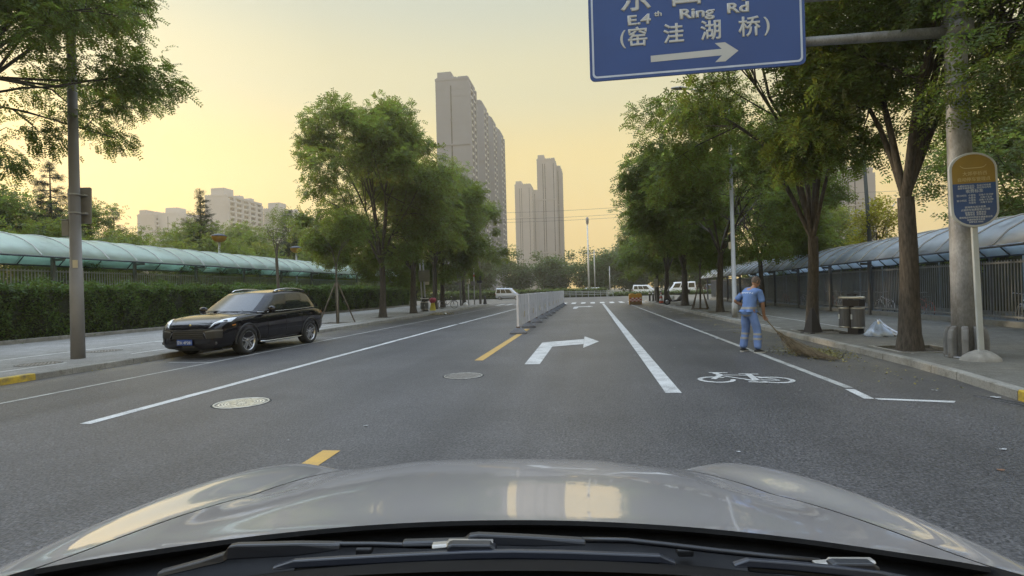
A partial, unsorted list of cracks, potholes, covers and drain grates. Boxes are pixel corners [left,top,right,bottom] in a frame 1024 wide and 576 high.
manhole cover [210,397,272,409]
